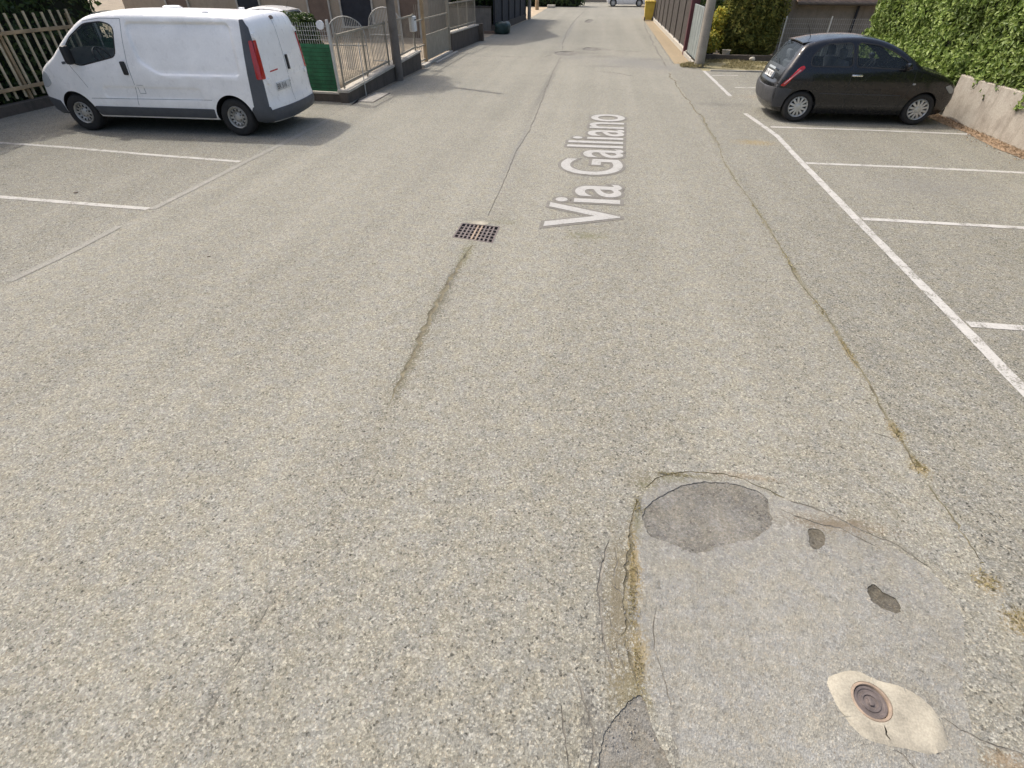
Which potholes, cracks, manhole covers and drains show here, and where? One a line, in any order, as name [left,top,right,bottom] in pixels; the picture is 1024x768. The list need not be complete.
crack [205,605,269,717]
drain grate [453,221,500,243]
crack [561,74,981,768]
crack [943,717,1024,755]
crack [390,10,585,402]
